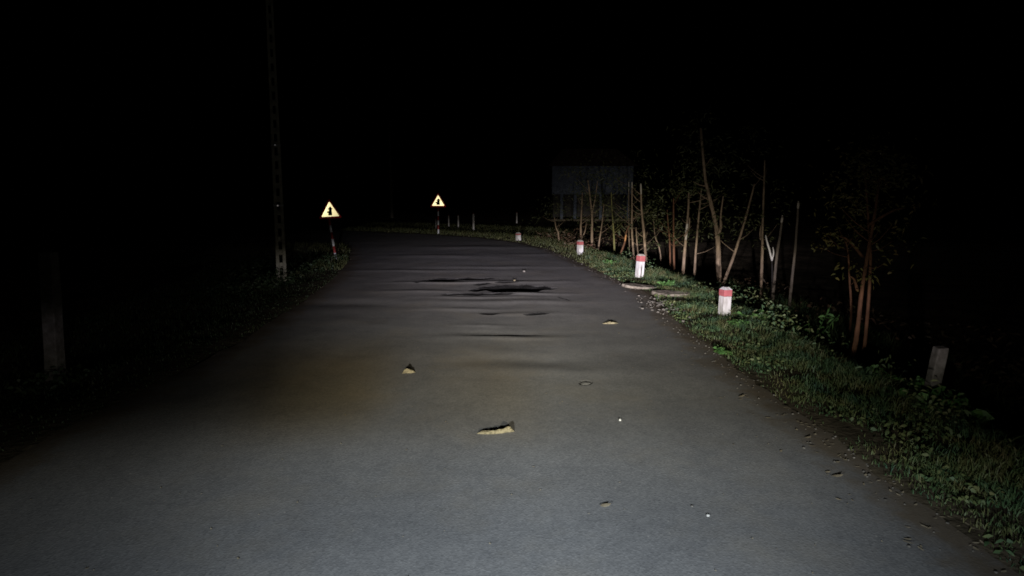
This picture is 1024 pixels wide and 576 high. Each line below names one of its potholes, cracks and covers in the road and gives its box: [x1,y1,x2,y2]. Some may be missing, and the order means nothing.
pothole [469,284,557,292]
